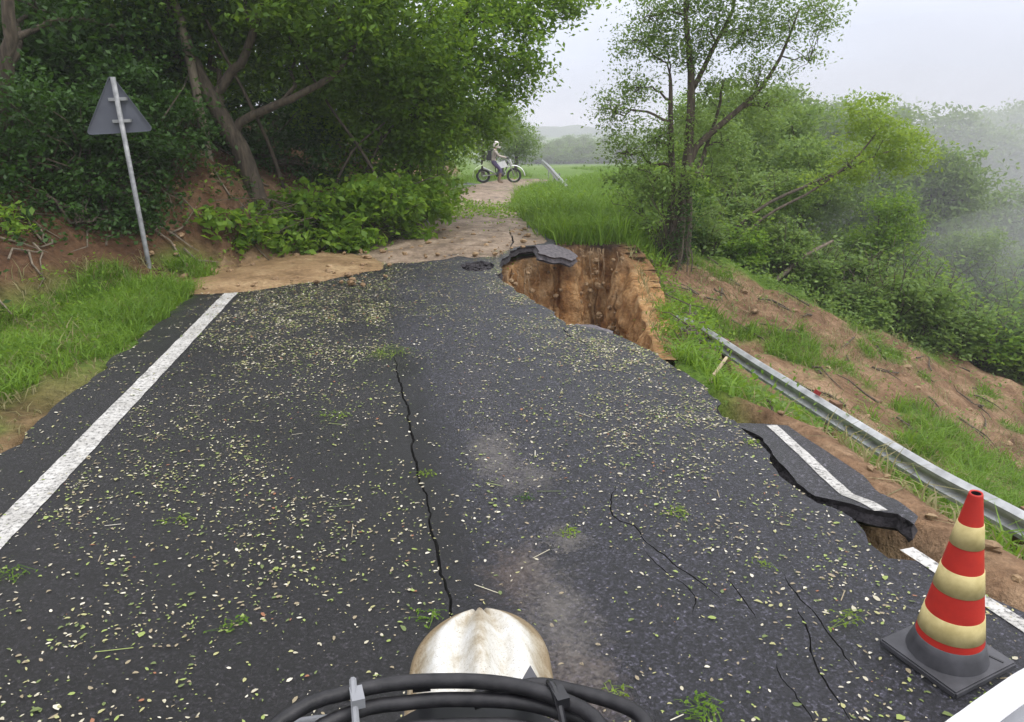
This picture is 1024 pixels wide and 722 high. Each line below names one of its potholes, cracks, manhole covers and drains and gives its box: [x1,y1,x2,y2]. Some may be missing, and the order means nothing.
pothole [461,261,494,271]
crack [776,578,859,722]
crack [610,489,756,618]
